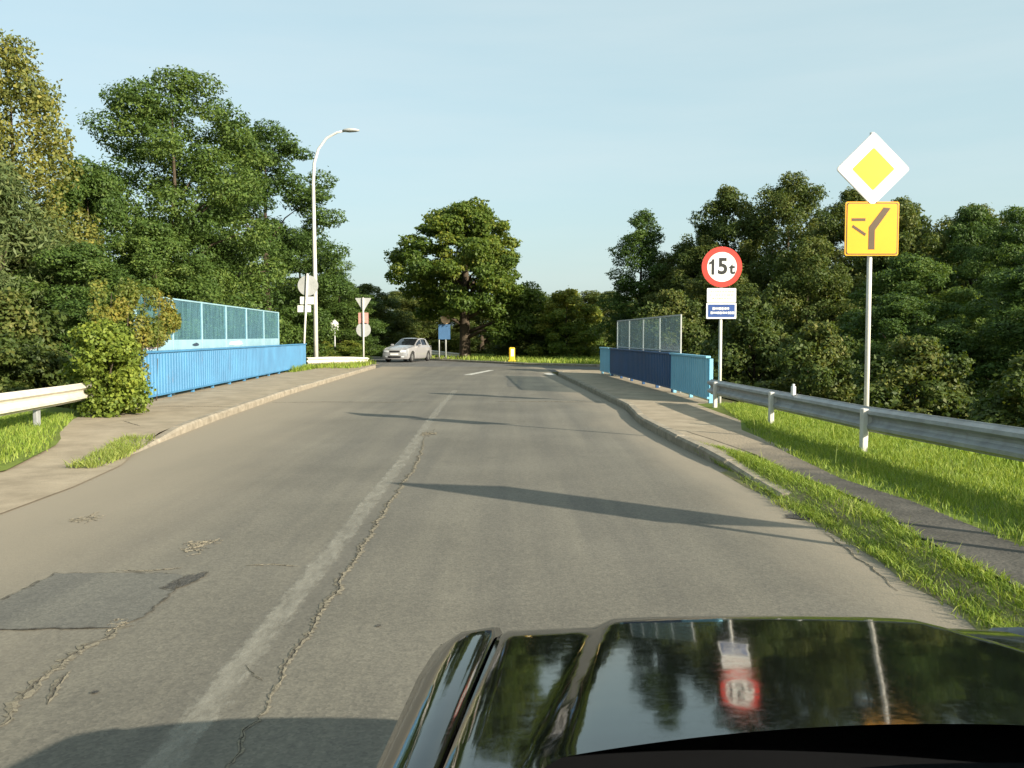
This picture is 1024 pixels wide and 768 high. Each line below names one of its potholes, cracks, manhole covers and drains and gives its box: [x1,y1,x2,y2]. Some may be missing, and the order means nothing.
crack [124,538,223,571]
crack [224,429,437,768]
crack [824,532,898,591]
crack [0,618,132,727]
